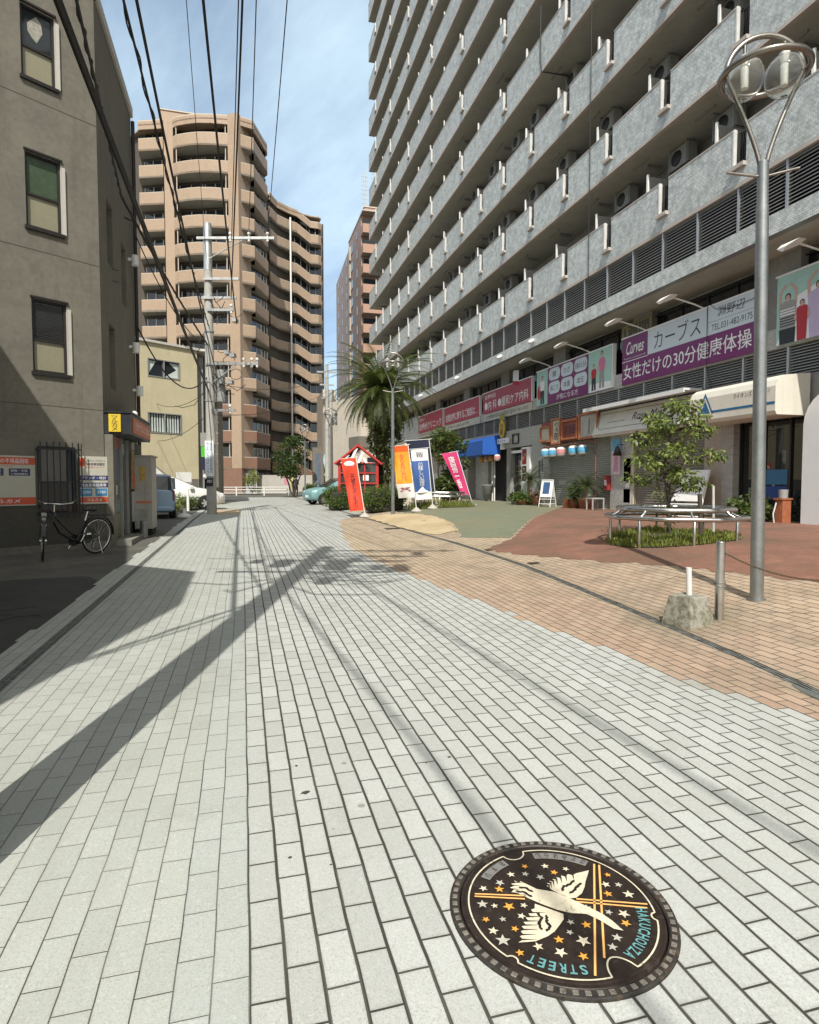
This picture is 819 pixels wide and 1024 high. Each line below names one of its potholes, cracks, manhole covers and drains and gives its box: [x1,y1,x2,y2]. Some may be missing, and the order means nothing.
manhole cover [450,841,680,1003]
